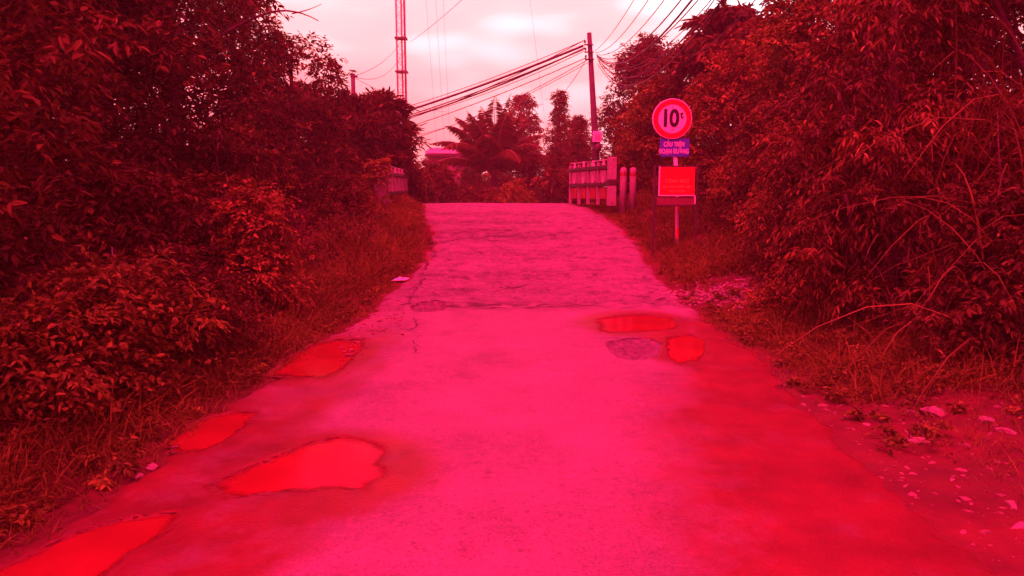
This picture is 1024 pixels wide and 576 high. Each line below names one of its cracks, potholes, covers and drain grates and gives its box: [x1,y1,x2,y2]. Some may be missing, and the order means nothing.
pothole [161,410,261,454]
pothole [592,313,683,333]
pothole [202,433,392,499]
pothole [664,333,708,364]
pothole [0,509,184,576]
crack [402,210,528,353]
pothole [266,337,369,380]
